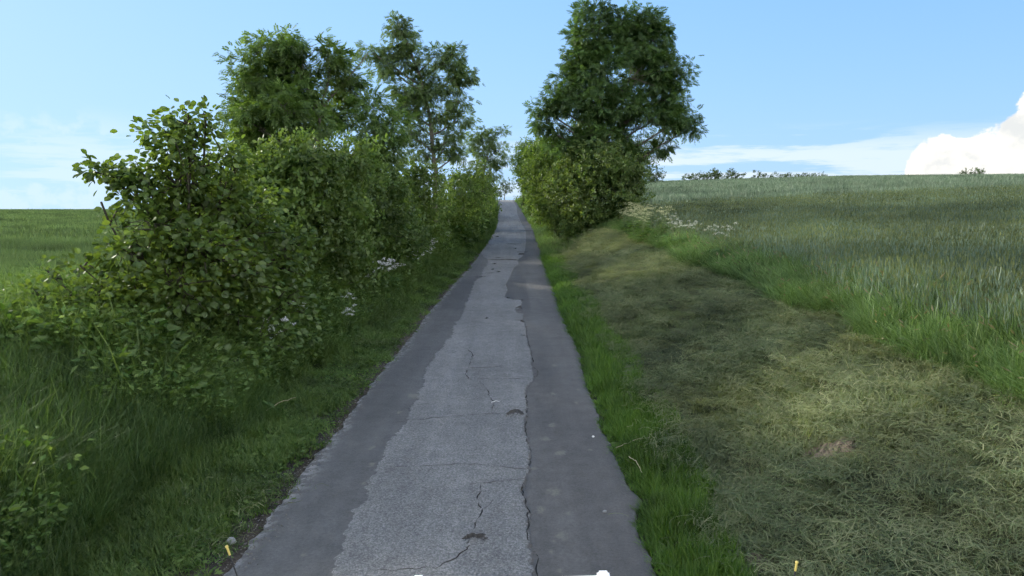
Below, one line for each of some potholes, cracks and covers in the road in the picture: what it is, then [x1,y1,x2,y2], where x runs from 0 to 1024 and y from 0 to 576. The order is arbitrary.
crack [372,462,536,573]
pothole [458,531,492,546]
crack [392,349,541,423]
pothole [504,408,527,417]
